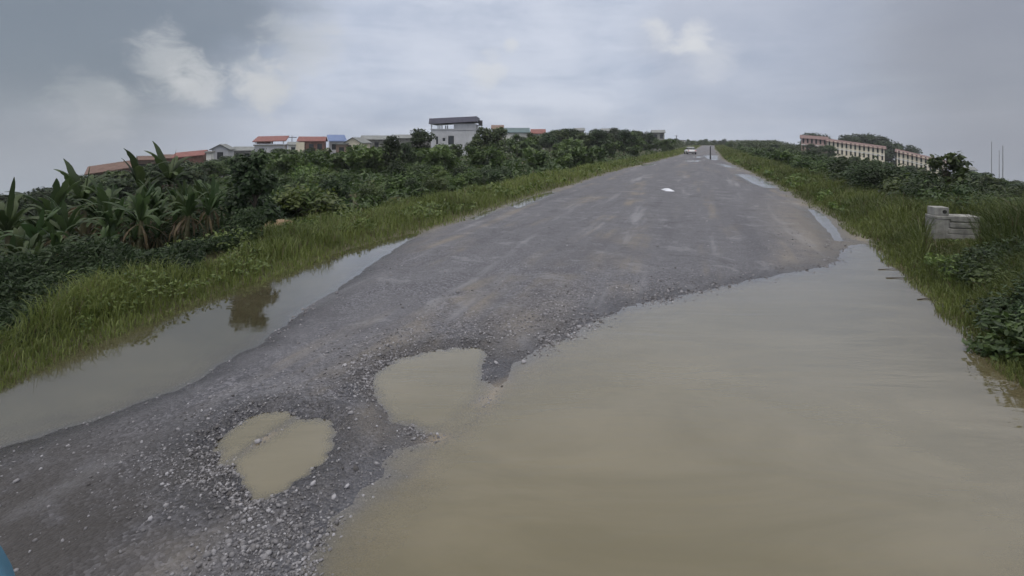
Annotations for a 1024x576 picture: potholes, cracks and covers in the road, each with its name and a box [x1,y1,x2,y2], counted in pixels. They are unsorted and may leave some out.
pothole [356,341,497,433]
pothole [199,402,351,508]
